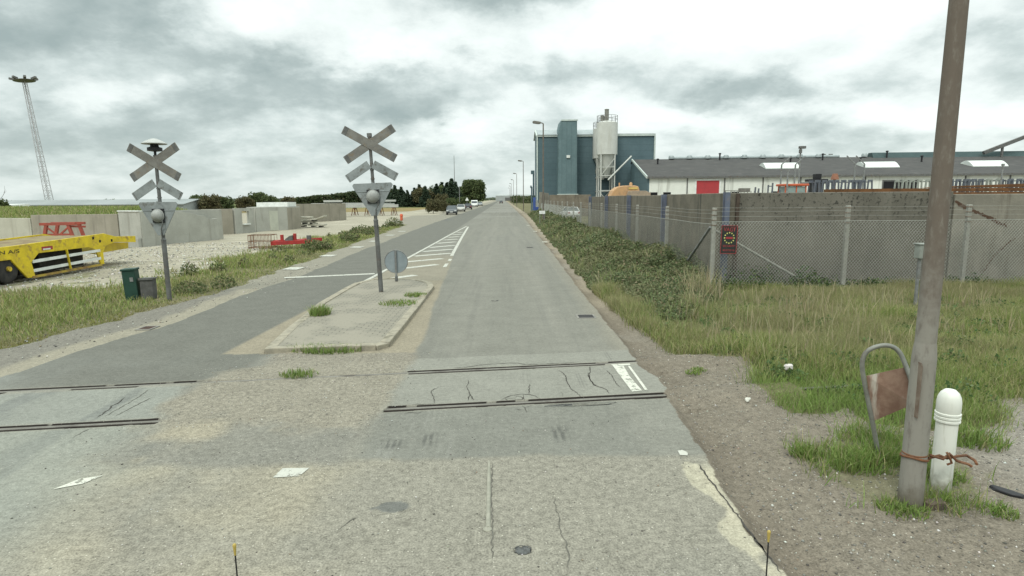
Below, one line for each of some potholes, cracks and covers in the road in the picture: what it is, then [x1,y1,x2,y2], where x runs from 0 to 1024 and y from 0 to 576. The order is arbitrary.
crack [554,497,570,570]
crack [693,448,780,572]
crack [459,362,619,400]
crack [75,390,148,436]
